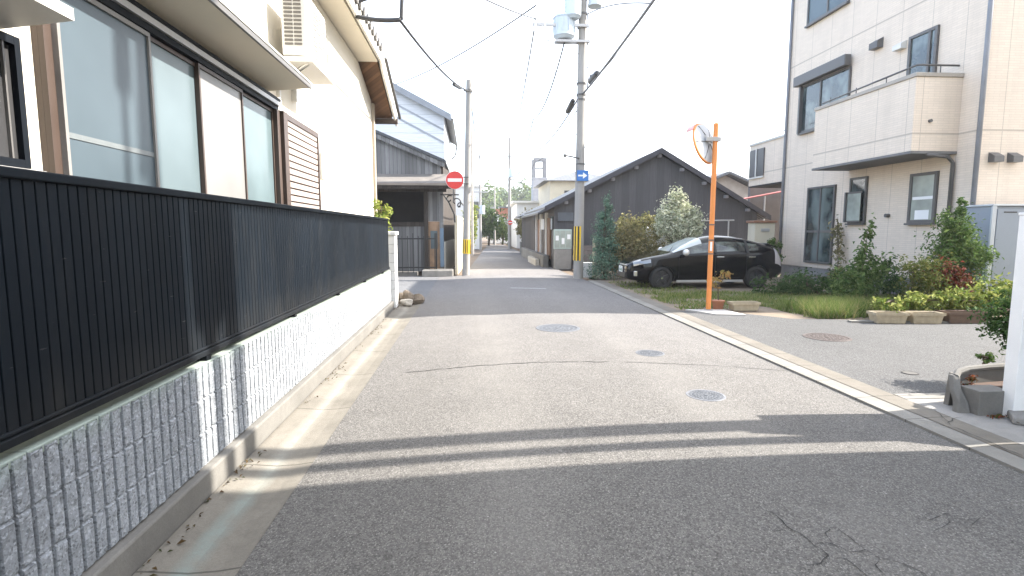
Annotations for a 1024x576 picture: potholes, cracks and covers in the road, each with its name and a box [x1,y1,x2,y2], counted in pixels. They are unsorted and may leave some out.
crack [764,509,927,576]
manhole cover [802,333,853,342]
manhole cover [536,324,580,332]
manhole cover [686,389,726,401]
